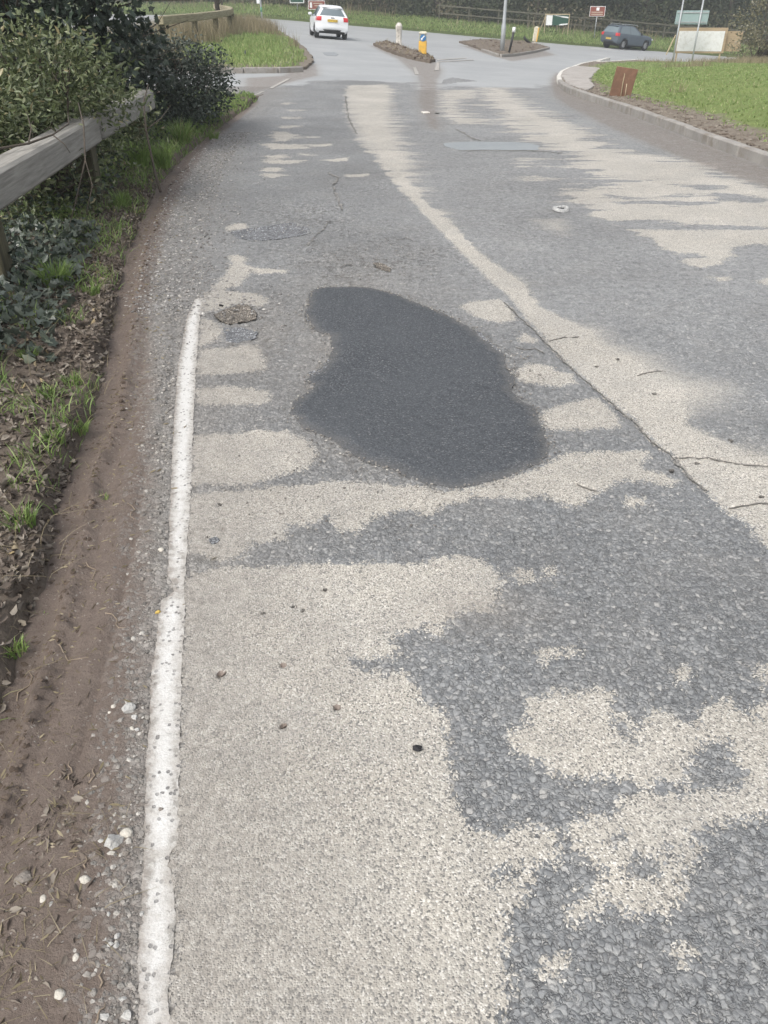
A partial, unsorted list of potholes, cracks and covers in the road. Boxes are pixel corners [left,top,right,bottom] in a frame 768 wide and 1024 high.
pothole [214,302,257,324]
crack [307,172,343,246]
